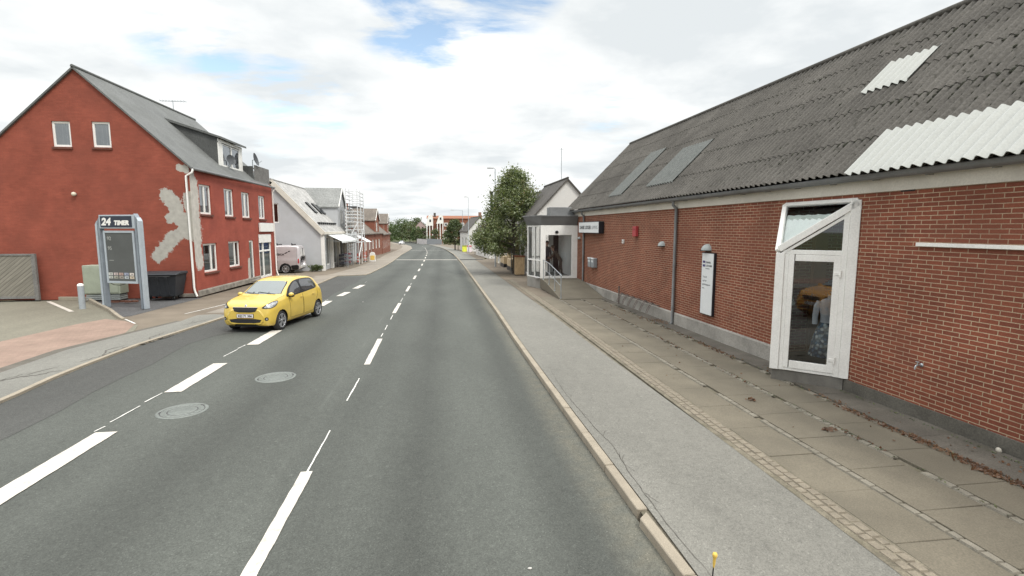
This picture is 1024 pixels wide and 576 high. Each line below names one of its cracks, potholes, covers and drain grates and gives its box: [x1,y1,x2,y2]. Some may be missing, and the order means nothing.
manhole cover [255,372,296,383]
manhole cover [155,403,209,419]
